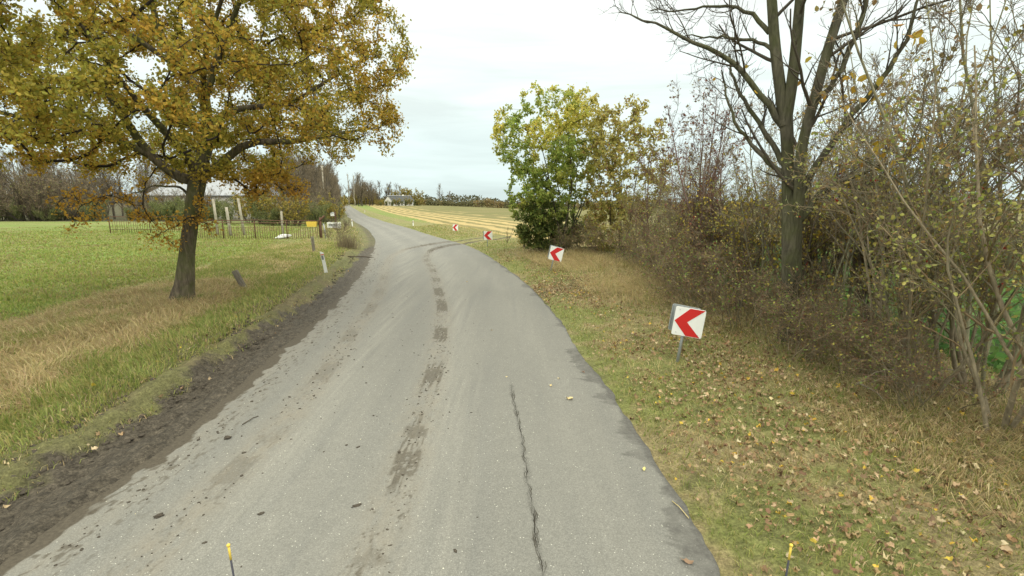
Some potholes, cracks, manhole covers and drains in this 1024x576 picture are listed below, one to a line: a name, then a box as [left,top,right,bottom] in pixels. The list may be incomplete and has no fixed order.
crack [511,392,547,572]
